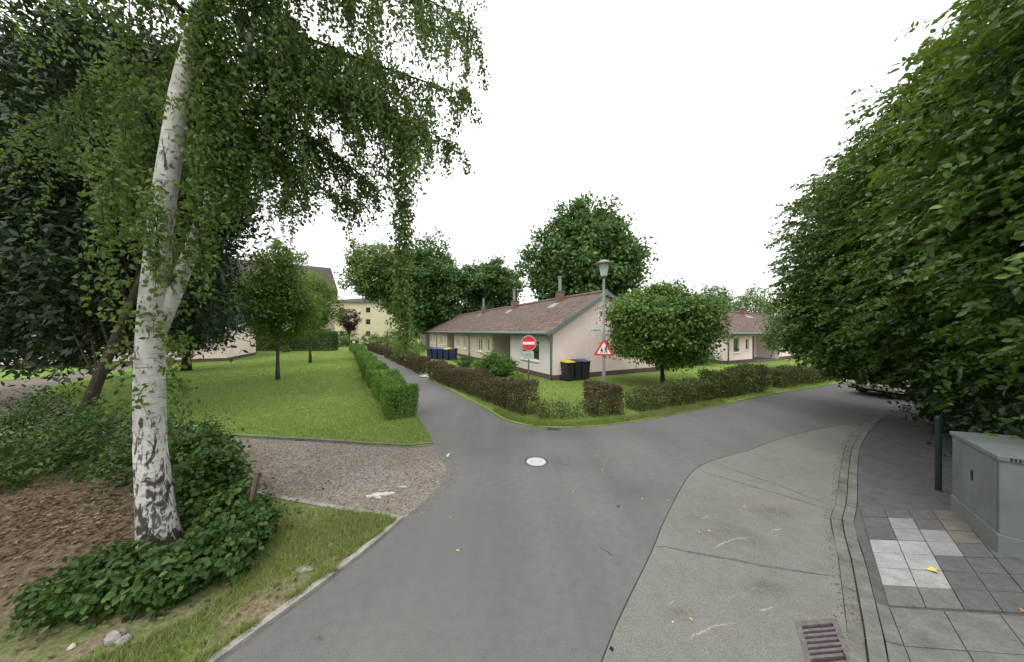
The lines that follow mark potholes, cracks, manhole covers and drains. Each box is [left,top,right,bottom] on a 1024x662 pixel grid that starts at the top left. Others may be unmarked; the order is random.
manhole cover [525,456,548,467]
crack [682,622,738,659]
drain grate [795,618,849,662]
